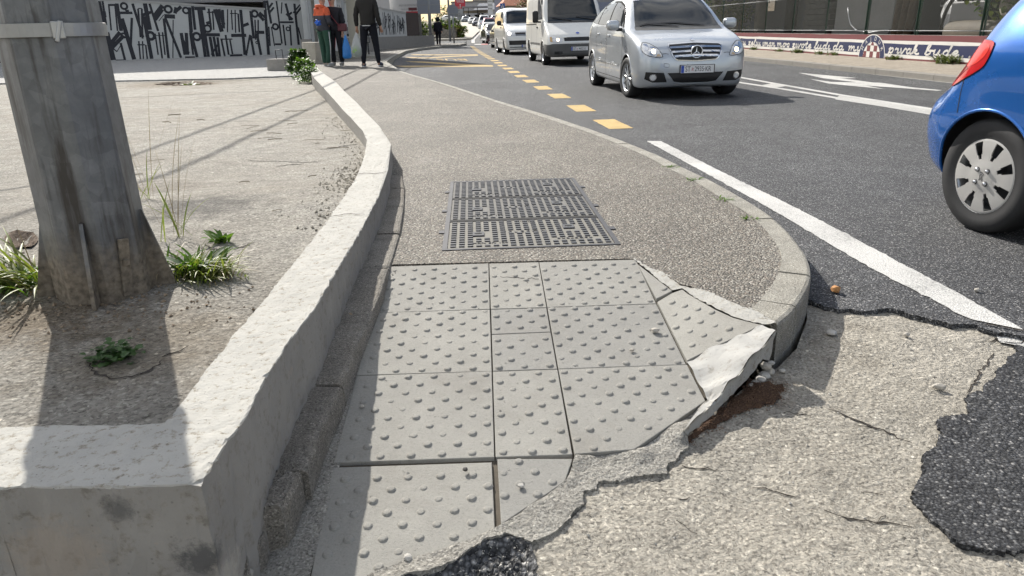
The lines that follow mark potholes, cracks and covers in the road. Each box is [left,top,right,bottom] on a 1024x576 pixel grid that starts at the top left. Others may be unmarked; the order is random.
crack [829,409,912,443]
crack [87,346,188,379]
pothole [405,534,539,576]
crack [825,510,912,527]
